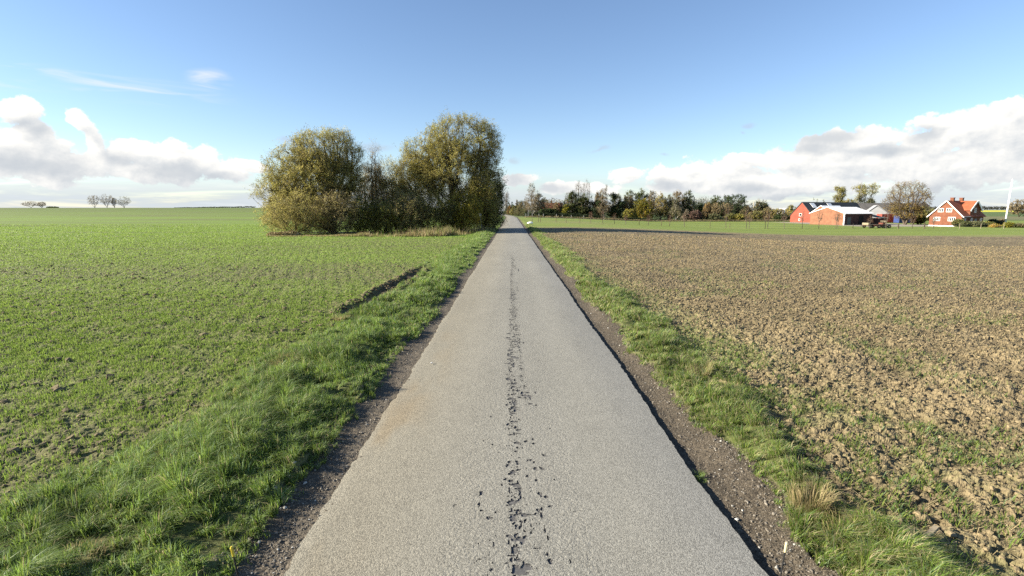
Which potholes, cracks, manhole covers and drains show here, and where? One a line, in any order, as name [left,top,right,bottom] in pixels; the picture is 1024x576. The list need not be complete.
crack [453,259,594,576]
